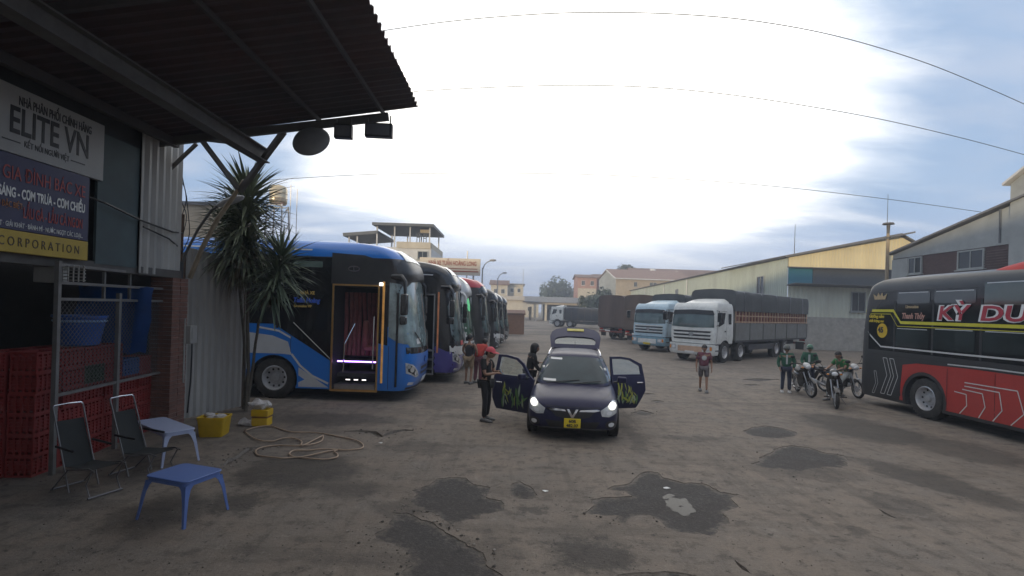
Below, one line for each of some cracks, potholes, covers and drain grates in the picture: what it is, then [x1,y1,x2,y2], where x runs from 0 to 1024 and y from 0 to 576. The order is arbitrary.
pothole [582,471,739,537]
